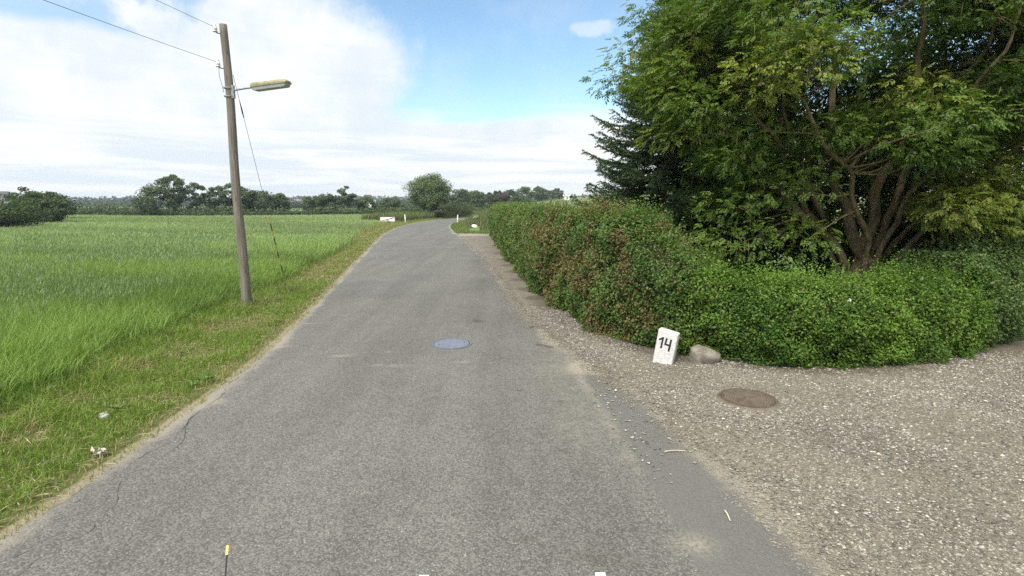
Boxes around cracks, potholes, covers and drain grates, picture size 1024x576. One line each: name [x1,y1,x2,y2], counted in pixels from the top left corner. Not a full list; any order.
manhole cover [431,338,472,349]
crack [15,362,258,574]
manhole cover [717,388,780,410]
